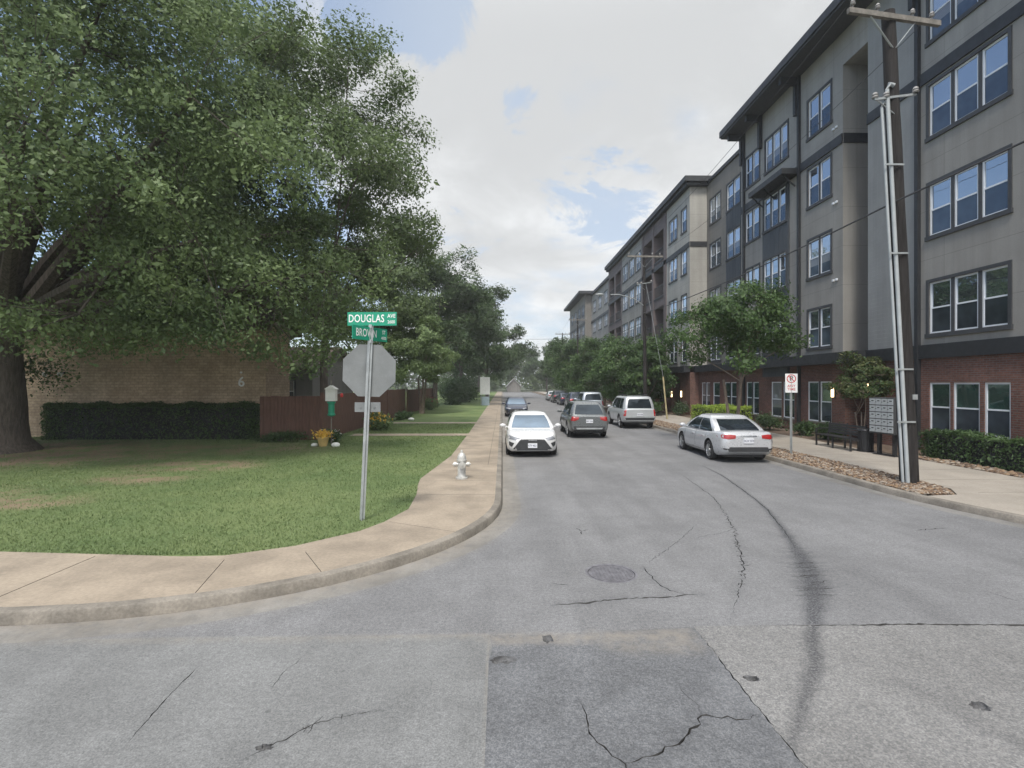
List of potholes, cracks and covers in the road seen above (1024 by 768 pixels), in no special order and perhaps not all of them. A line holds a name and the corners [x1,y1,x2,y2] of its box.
pothole [490,656,517,664]
crack [581,630,808,768]
crack [554,478,749,608]
manhole cover [585,564,638,583]
crack [239,710,383,761]
crack [130,671,194,740]
pothole [968,701,992,711]
